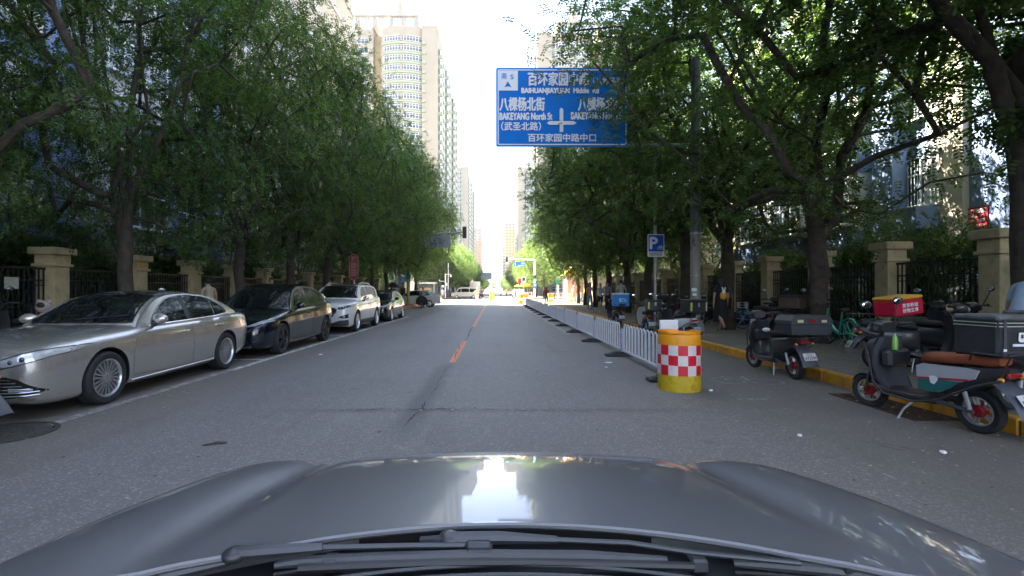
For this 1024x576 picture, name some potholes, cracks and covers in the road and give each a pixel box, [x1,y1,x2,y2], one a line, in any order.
crack [342,327,609,428]
manhole cover [0,421,61,444]
